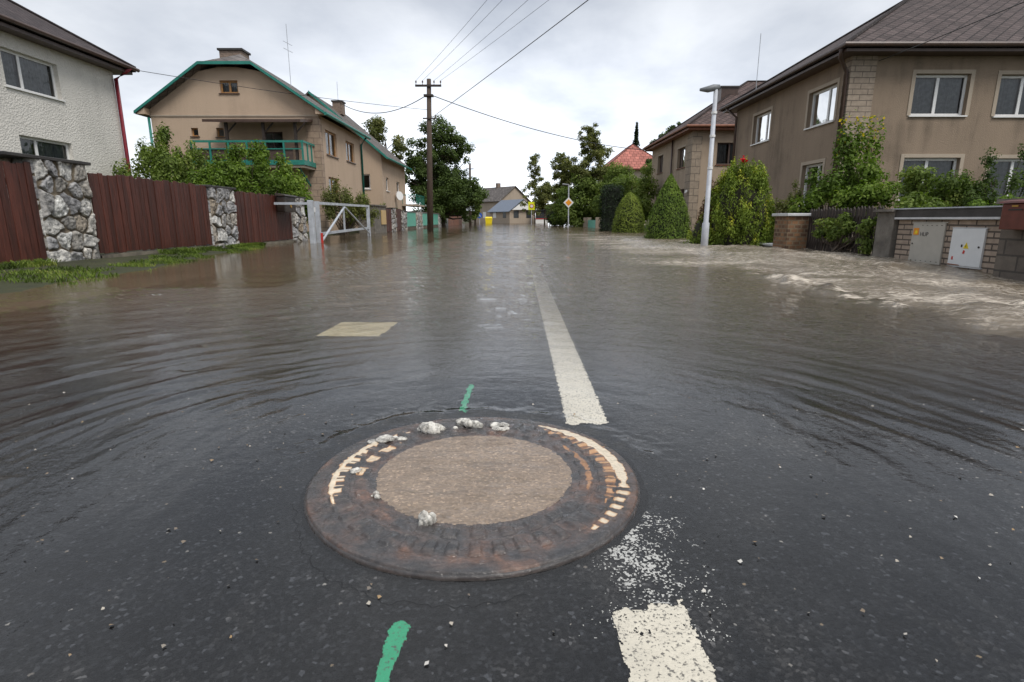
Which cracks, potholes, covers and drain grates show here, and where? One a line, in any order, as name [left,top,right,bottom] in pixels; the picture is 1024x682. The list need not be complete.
manhole cover [298,417,649,585]
